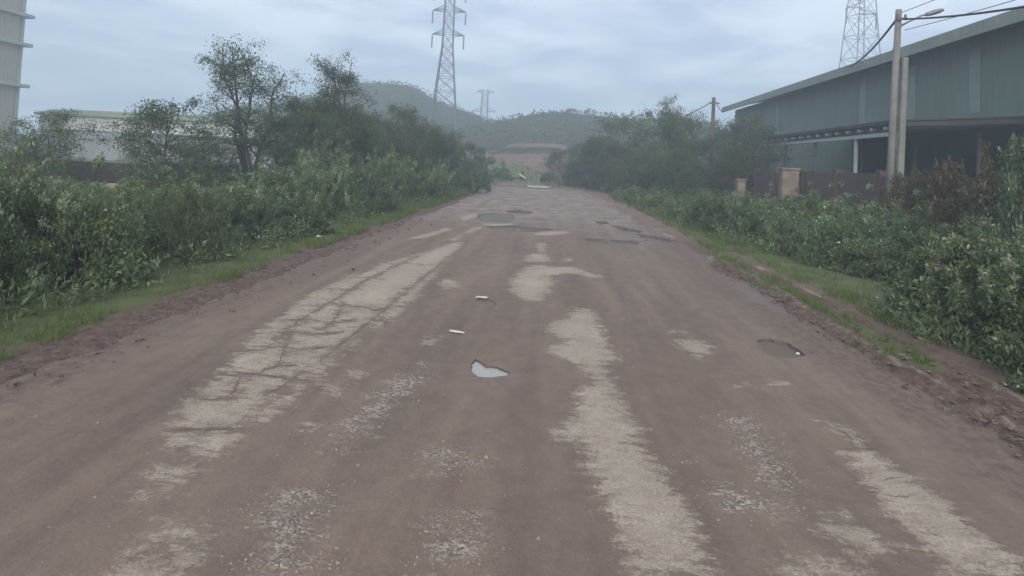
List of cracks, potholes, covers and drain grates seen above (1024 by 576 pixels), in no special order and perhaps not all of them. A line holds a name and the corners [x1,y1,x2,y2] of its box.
pothole [477,213,515,222]
pothole [636,234,678,245]
pothole [471,359,510,377]
pothole [757,338,805,358]
crack [171,249,451,430]
